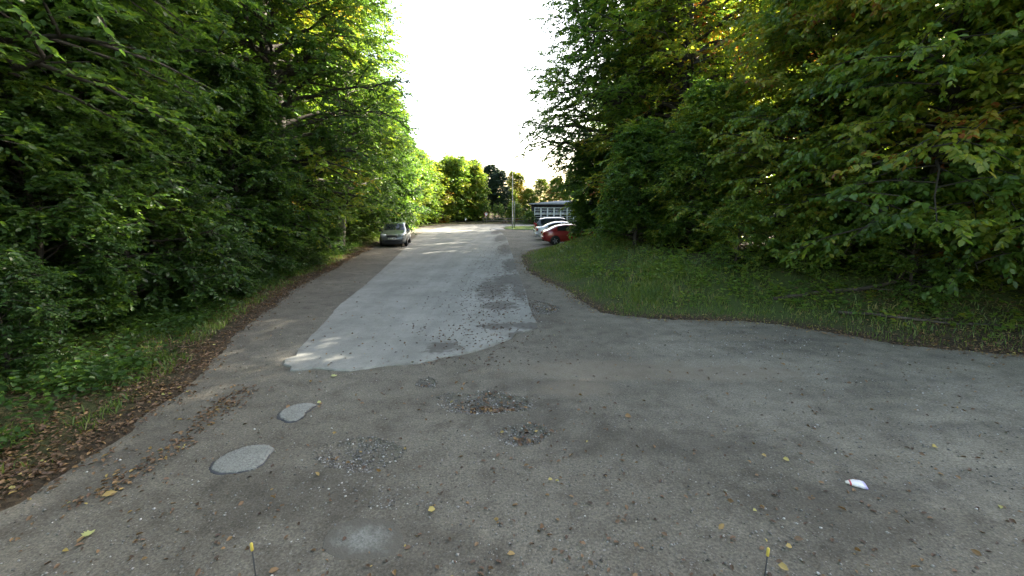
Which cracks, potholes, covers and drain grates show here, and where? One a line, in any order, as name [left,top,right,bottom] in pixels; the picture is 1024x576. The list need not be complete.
pothole [525,301,560,315]
pothole [312,436,407,473]
pothole [434,390,533,415]
pothole [490,421,554,447]
pothole [415,376,437,388]
